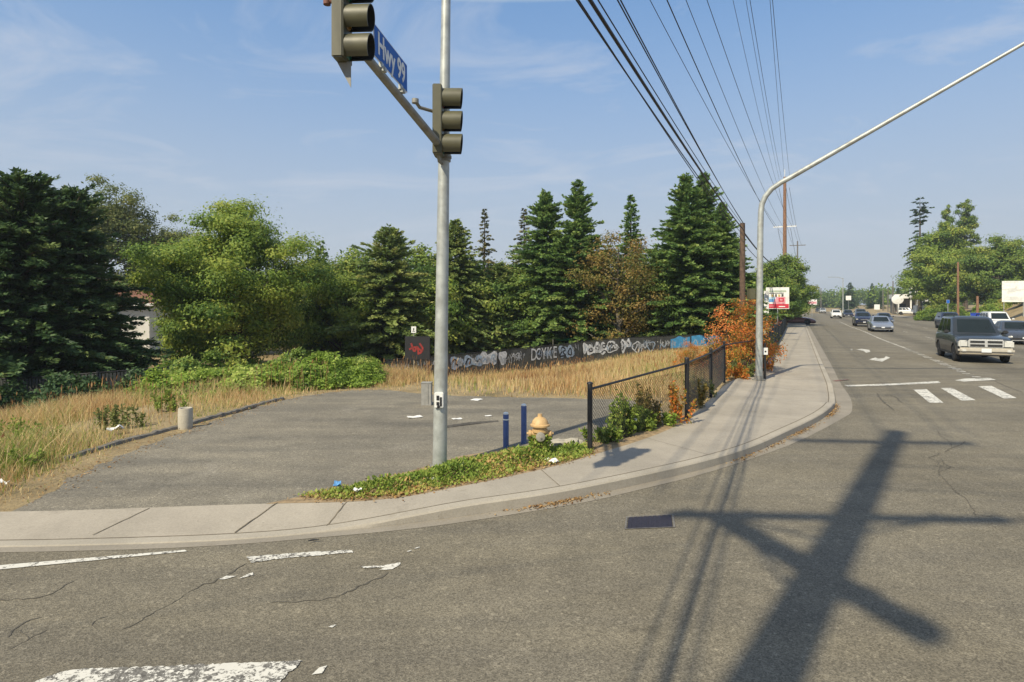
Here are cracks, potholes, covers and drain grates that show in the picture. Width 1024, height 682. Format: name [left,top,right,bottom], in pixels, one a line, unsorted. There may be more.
crack [928,431,999,516]
crack [4,617,46,651]
manhole cover [624,514,675,529]
crack [121,563,246,630]
crack [269,572,388,603]
